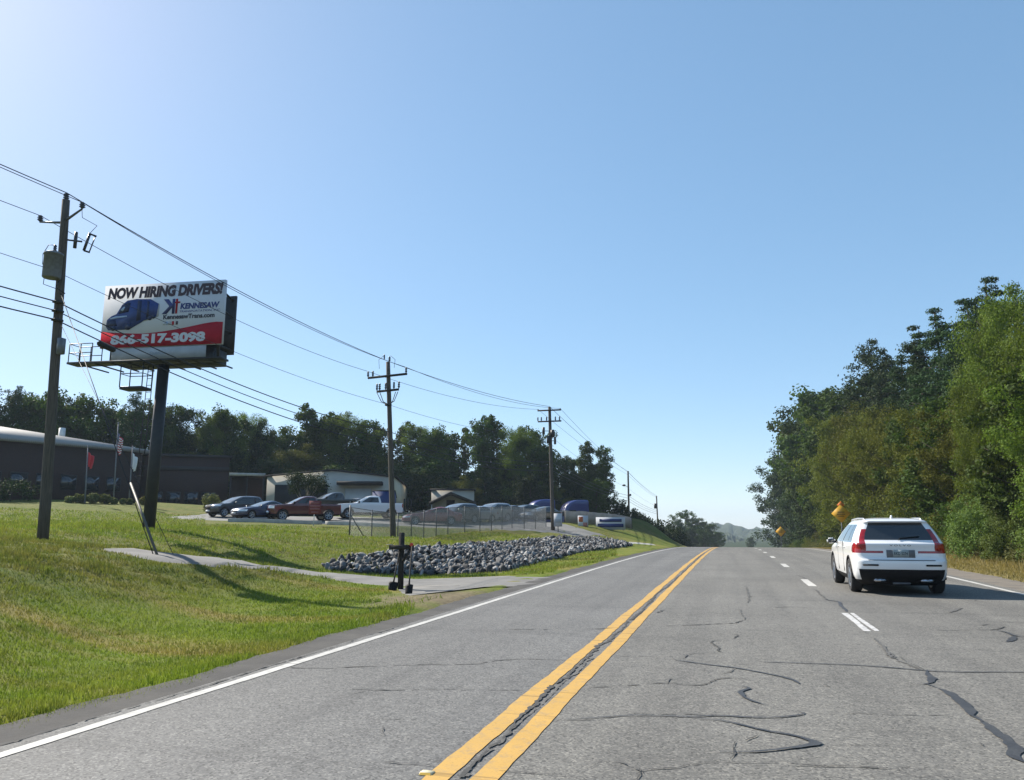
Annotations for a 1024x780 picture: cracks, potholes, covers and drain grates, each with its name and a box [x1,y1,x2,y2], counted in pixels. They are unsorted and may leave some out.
crack [294,658,562,668]
crack [659,586,809,639]
crack [936,620,1017,642]
crack [598,677,746,687]
crack [786,662,993,672]
